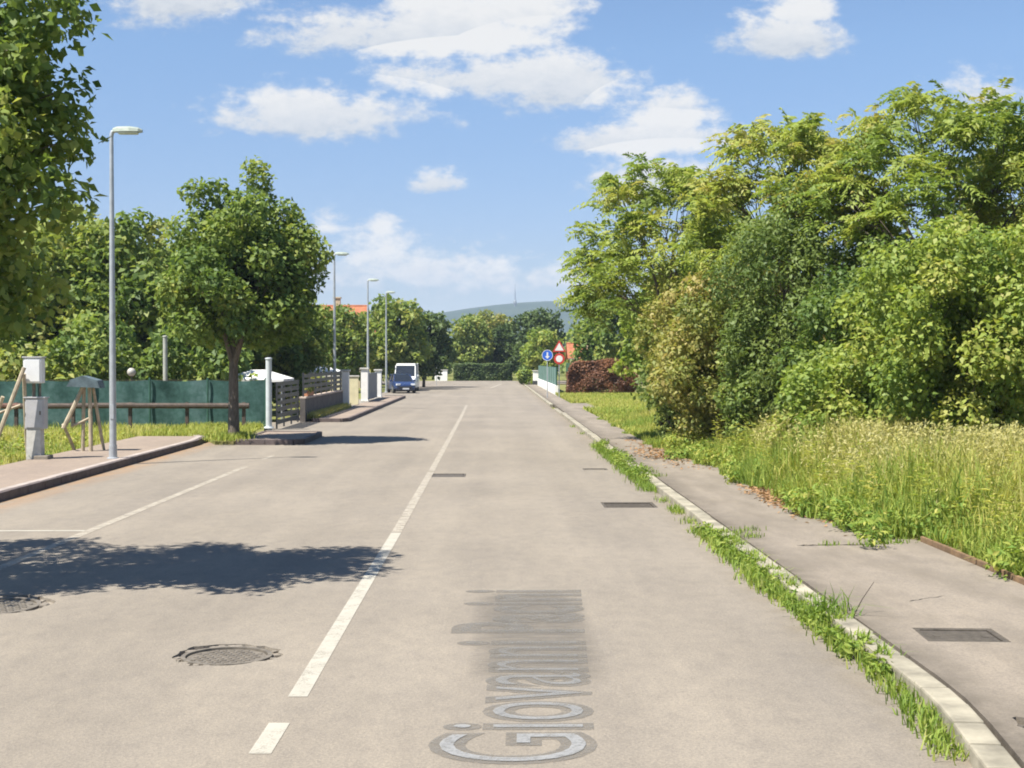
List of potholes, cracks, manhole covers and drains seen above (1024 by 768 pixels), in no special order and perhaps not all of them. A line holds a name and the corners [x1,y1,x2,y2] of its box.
manhole cover [173,645,281,666]
manhole cover [913,628,1009,642]
manhole cover [0,596,53,614]
